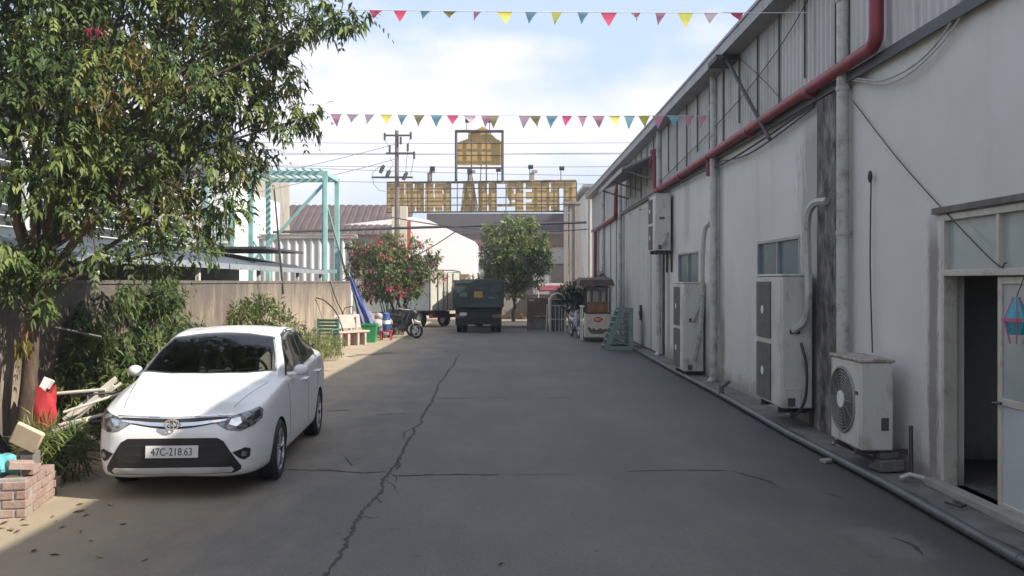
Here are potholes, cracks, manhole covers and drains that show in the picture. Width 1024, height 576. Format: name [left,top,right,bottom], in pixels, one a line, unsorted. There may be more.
crack [889,536,924,556]
crack [284,354,776,576]
